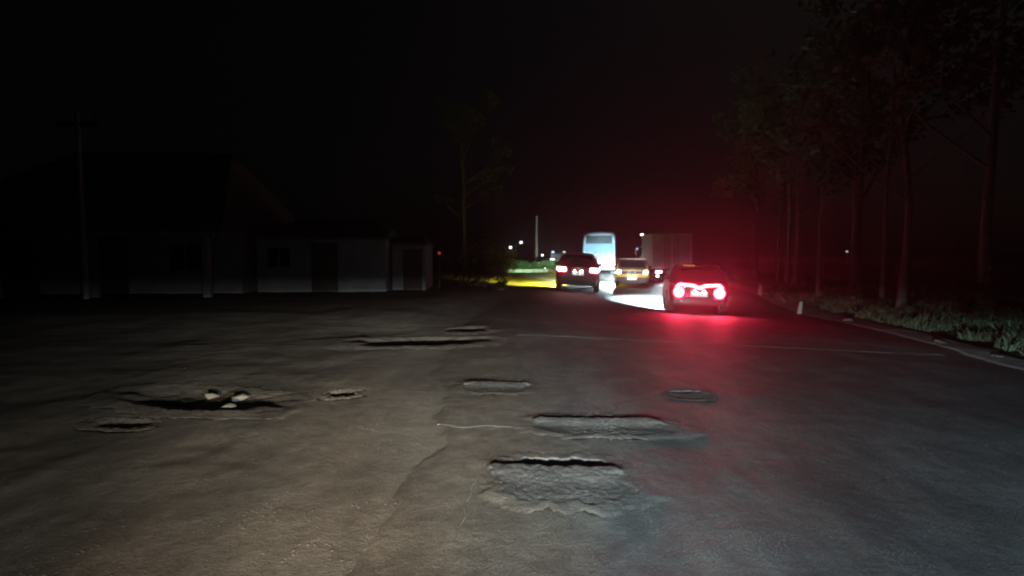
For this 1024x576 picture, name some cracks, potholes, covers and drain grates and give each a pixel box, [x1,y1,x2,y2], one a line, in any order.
pothole [448,378,542,395]
pothole [660,389,719,401]
pothole [74,417,163,432]
pothole [466,451,670,517]
pothole [509,413,711,440]
pothole [77,382,315,420]
pothole [442,325,503,335]
pothole [321,336,507,350]
pothole [319,388,366,401]
